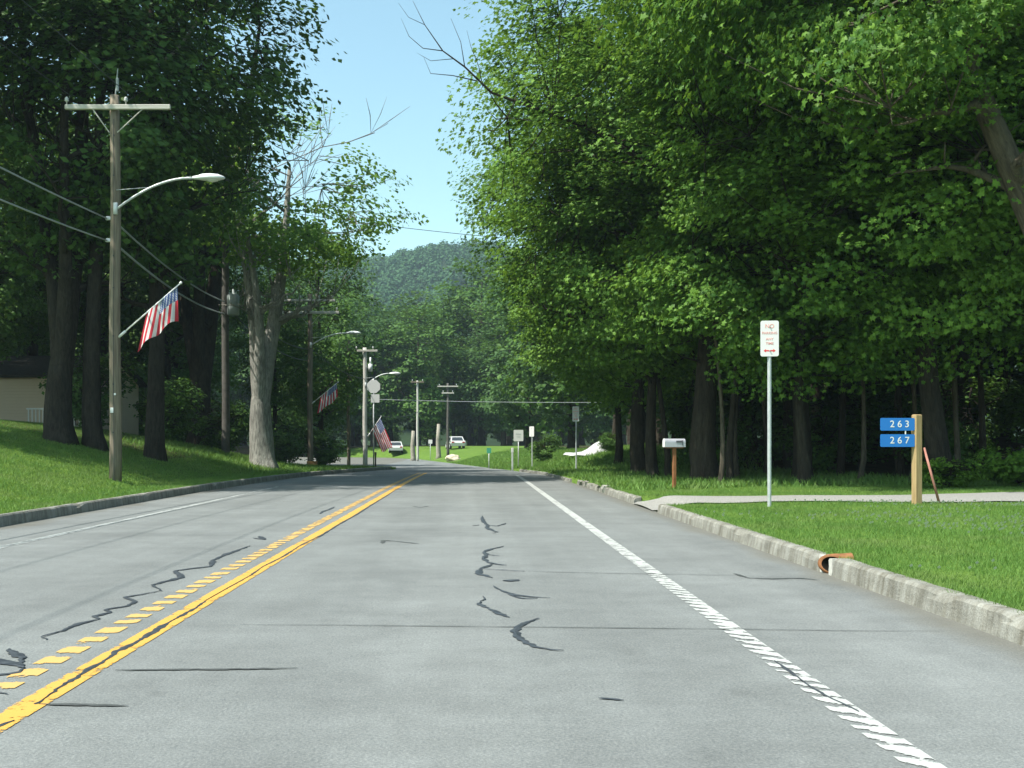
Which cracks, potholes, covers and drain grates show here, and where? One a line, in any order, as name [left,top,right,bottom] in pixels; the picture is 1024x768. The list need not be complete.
crack [0,492,392,726]
crack [774,660,860,712]
